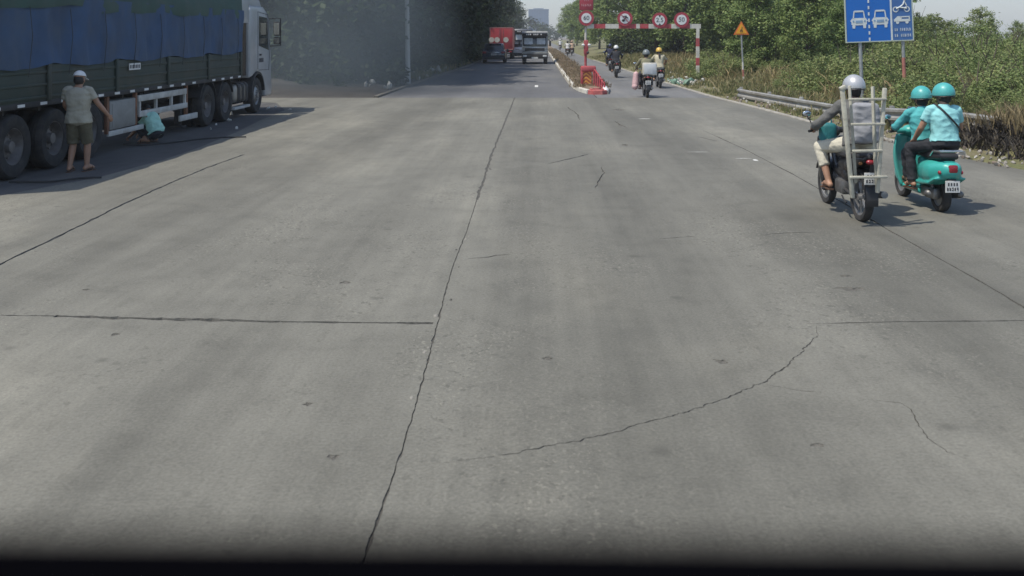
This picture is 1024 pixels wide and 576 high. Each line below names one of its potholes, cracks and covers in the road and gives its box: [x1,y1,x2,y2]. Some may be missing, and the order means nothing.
crack [887,401,961,457]
crack [447,328,818,463]
